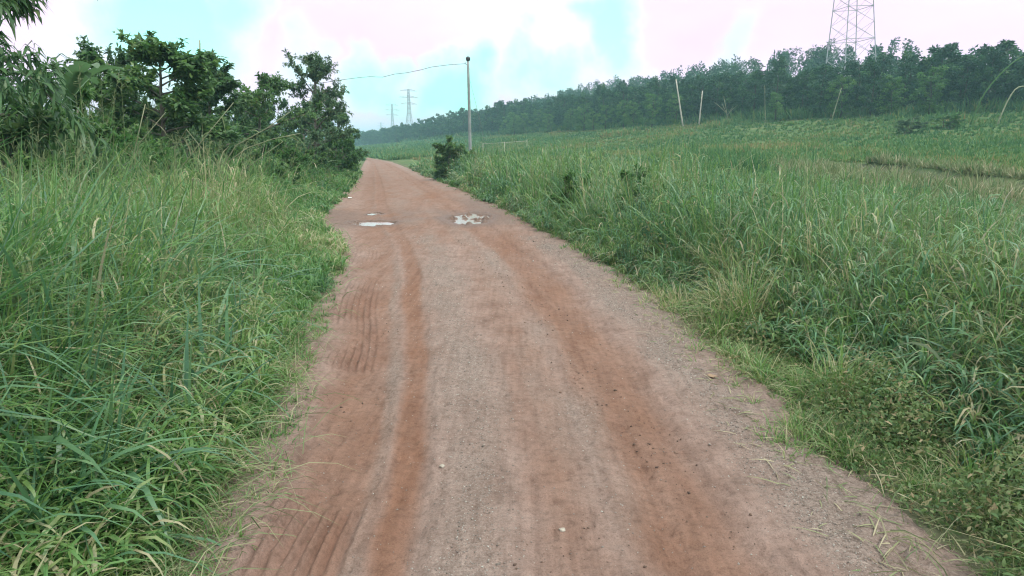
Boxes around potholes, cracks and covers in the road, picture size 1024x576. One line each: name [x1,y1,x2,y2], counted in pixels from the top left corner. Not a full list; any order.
pothole [436,210,502,228]
pothole [340,219,405,227]
